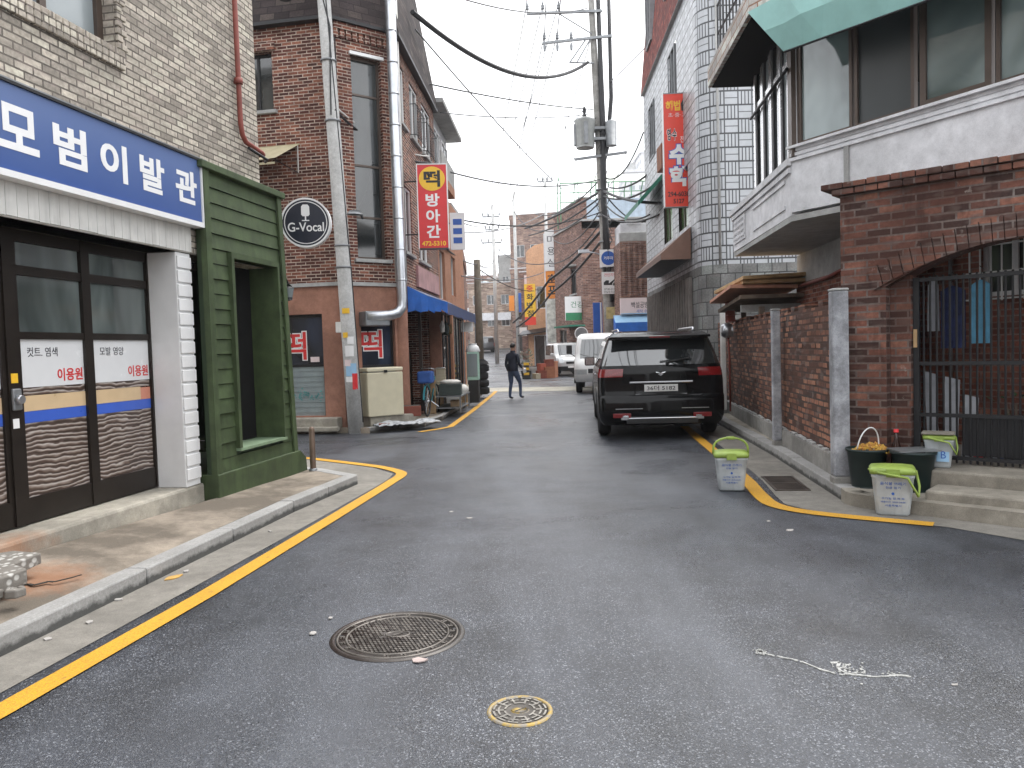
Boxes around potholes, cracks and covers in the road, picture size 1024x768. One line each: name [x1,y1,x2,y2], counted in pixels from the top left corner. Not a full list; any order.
drain grate [761,476,811,491]
manhole cover [487,695,553,728]
manhole cover [329,611,465,662]
crack [23,574,82,586]
